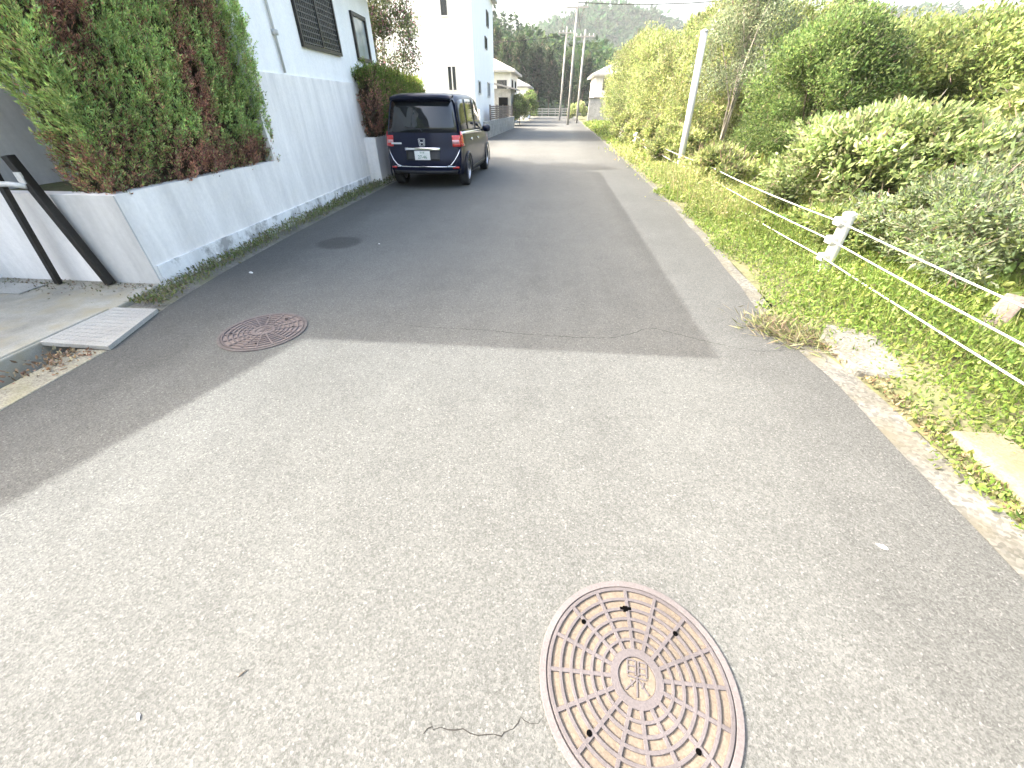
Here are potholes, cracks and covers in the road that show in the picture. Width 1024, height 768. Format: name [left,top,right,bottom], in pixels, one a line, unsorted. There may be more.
crack [423,716,544,737]
manhole cover [539,581,745,768]
crack [398,323,783,352]
manhole cover [216,313,308,352]
